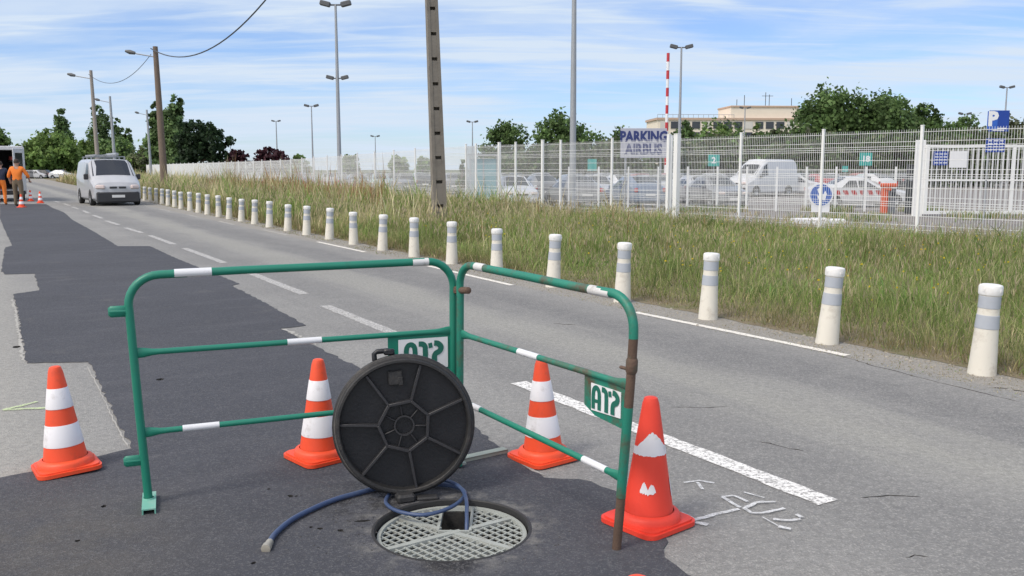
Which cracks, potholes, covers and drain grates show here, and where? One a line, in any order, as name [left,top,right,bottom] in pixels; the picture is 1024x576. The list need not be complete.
drain grate [376,506,527,561]
